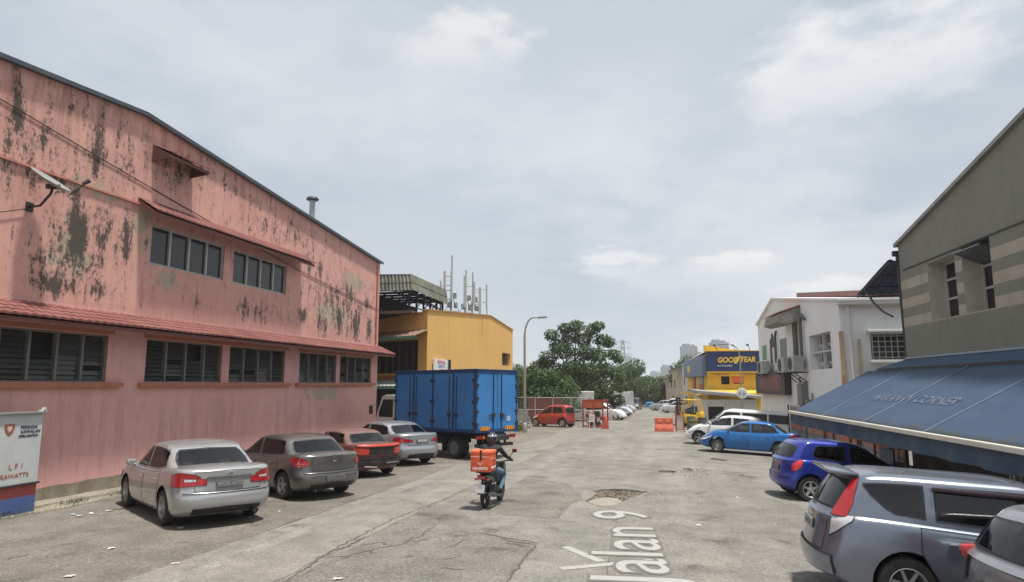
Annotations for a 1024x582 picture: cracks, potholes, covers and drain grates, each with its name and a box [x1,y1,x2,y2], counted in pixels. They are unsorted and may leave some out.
crack [285,493,455,582]
pothole [586,489,687,507]
crack [439,532,538,582]
